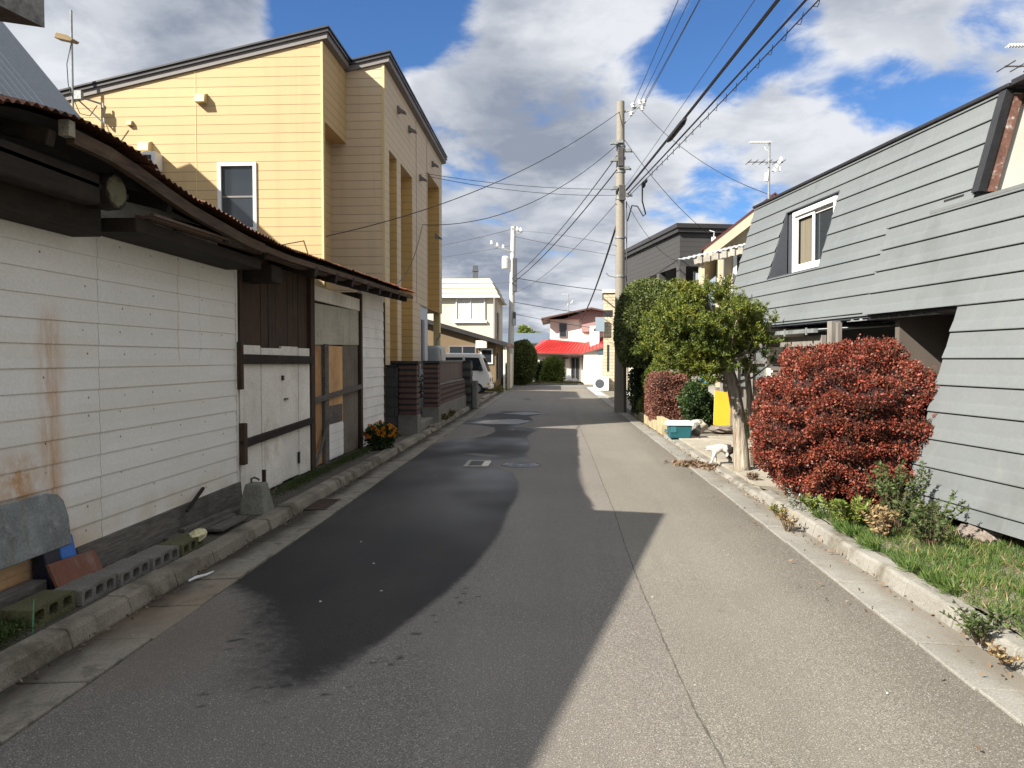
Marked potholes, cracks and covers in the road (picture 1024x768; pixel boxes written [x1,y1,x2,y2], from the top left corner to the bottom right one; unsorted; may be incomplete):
drain grate [303,499,341,511]
